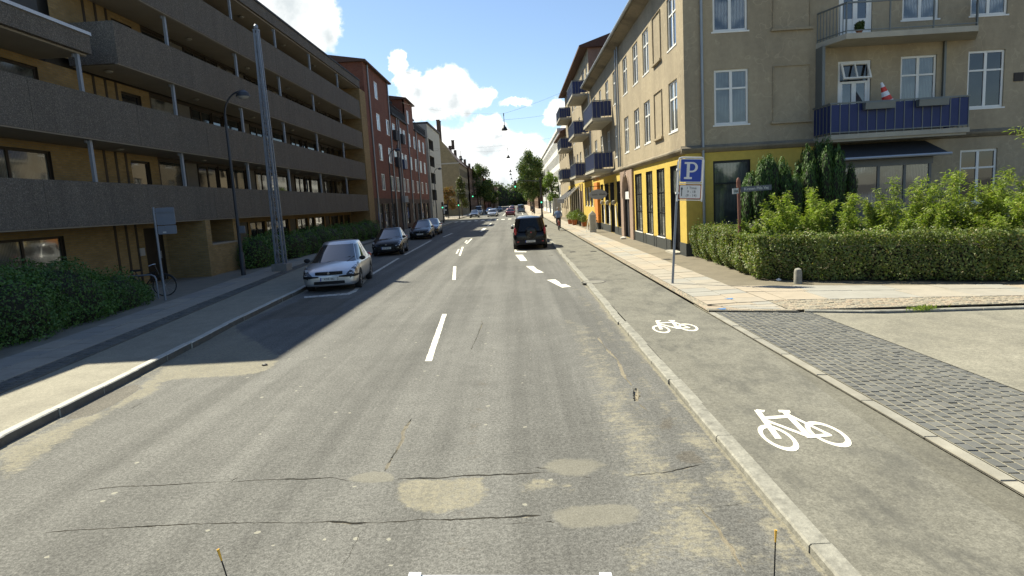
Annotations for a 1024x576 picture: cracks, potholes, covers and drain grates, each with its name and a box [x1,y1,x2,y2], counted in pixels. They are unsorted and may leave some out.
crack [597,337,646,409]
crack [86,418,543,491]
crack [632,464,701,476]
crack [46,515,554,564]
